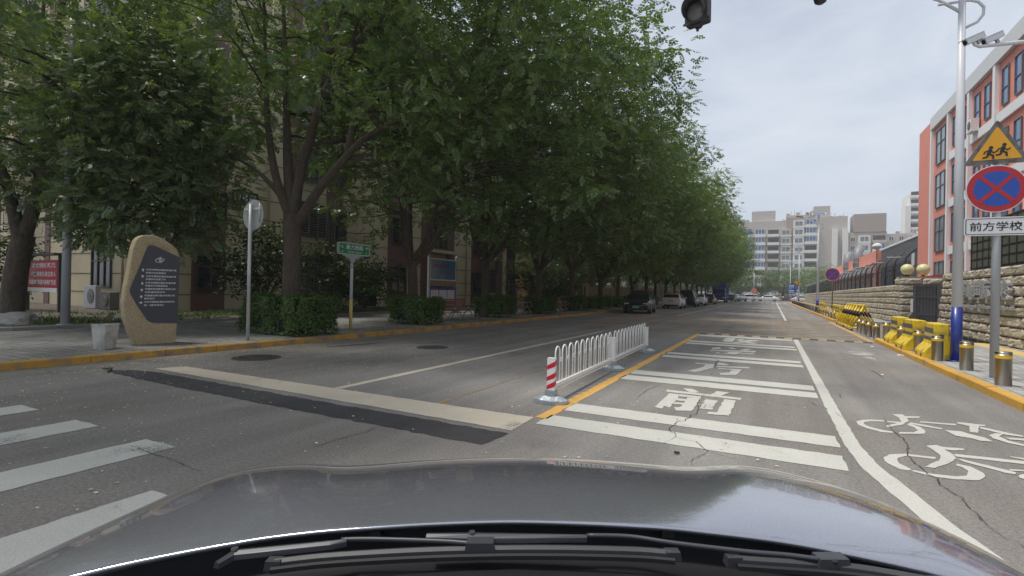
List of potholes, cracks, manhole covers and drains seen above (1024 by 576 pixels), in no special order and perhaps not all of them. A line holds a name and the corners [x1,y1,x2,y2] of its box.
crack [668,398,743,463]
crack [886,421,1023,546]
